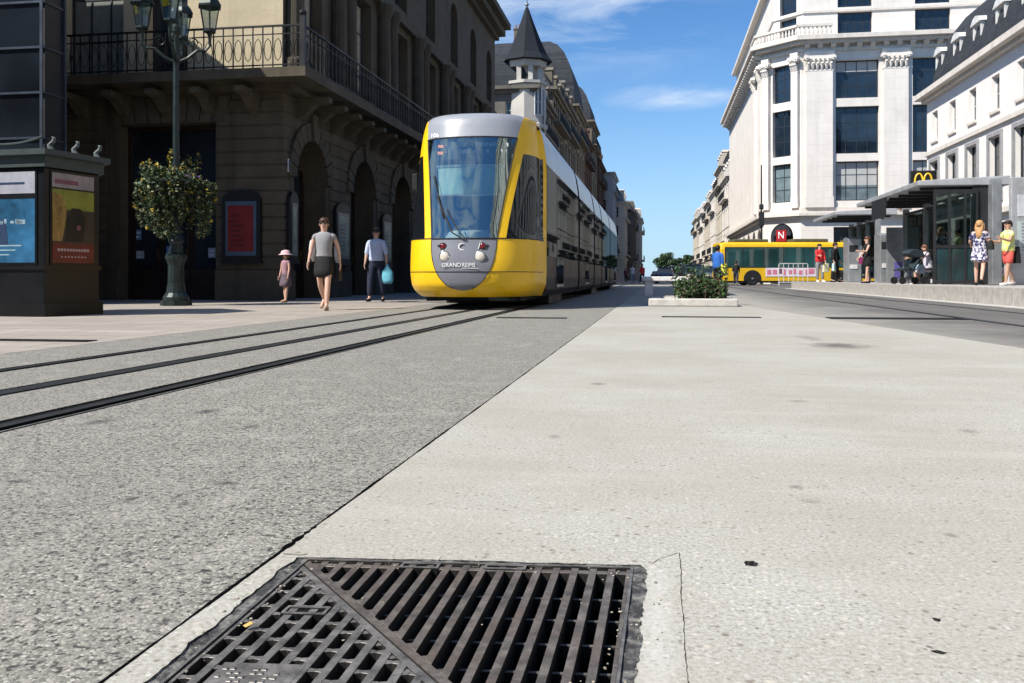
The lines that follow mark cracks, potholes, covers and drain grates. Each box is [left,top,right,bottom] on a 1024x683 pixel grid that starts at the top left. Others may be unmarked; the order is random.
drain grate [143,557,648,683]
